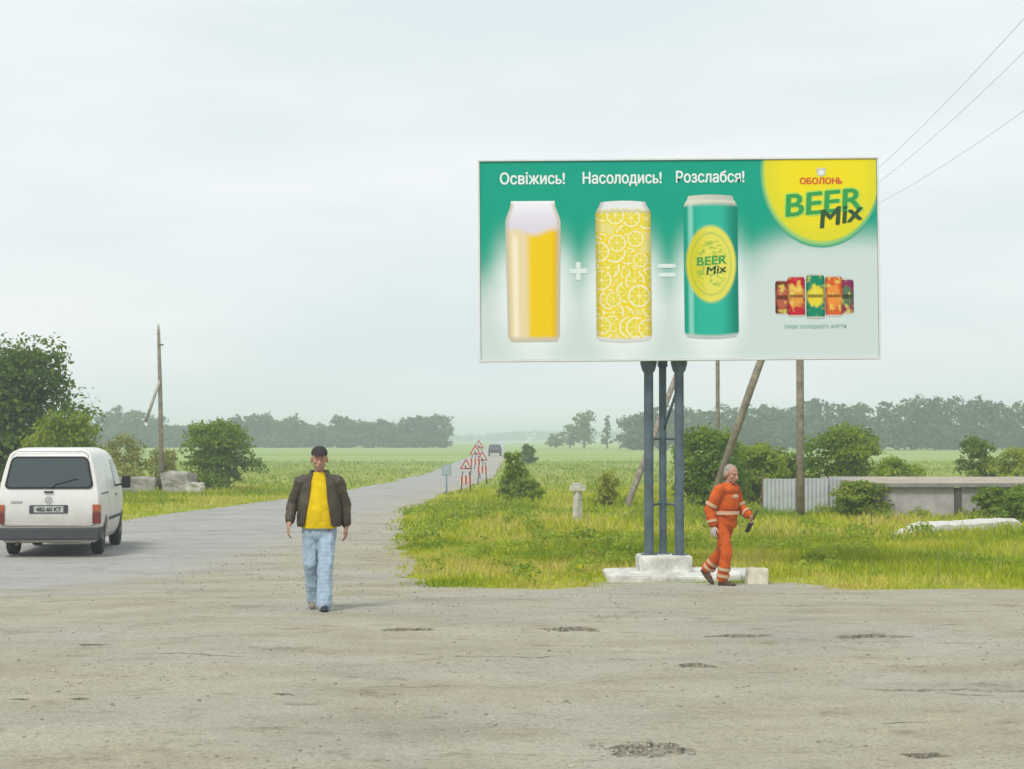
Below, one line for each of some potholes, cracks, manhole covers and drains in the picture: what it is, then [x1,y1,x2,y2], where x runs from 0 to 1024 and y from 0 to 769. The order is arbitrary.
pothole [611,743,698,758]
